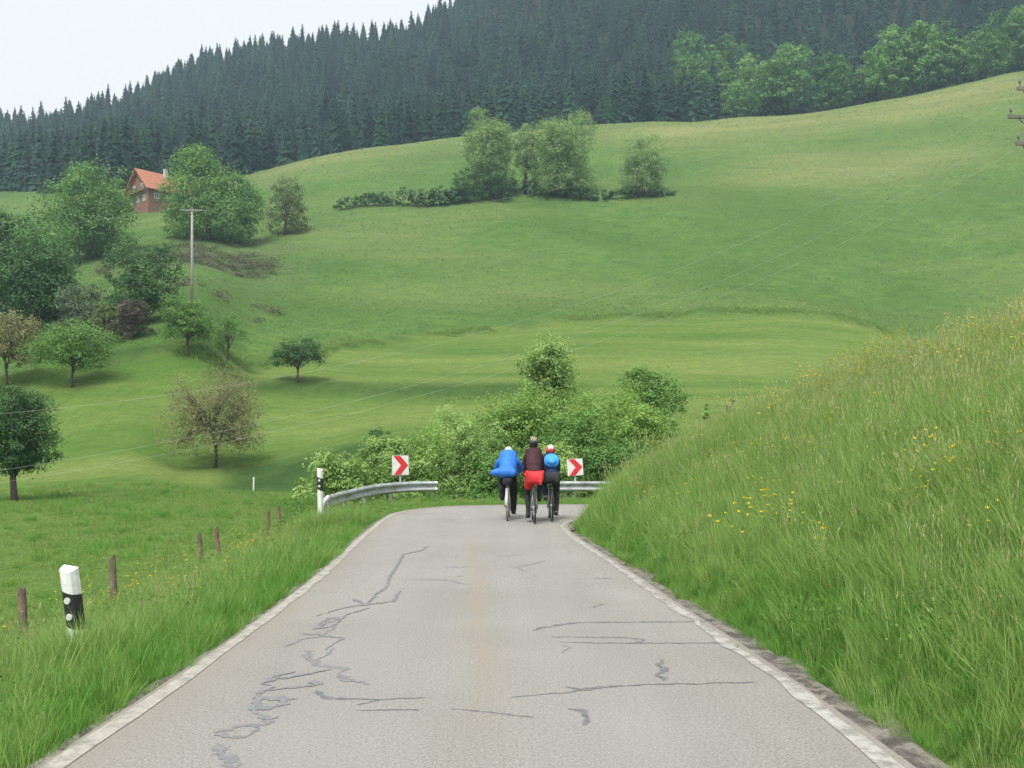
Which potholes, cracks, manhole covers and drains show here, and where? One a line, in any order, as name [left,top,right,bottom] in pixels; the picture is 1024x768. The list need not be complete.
crack [462,604,754,725]
crack [497,554,545,578]
crack [285,547,463,711]
